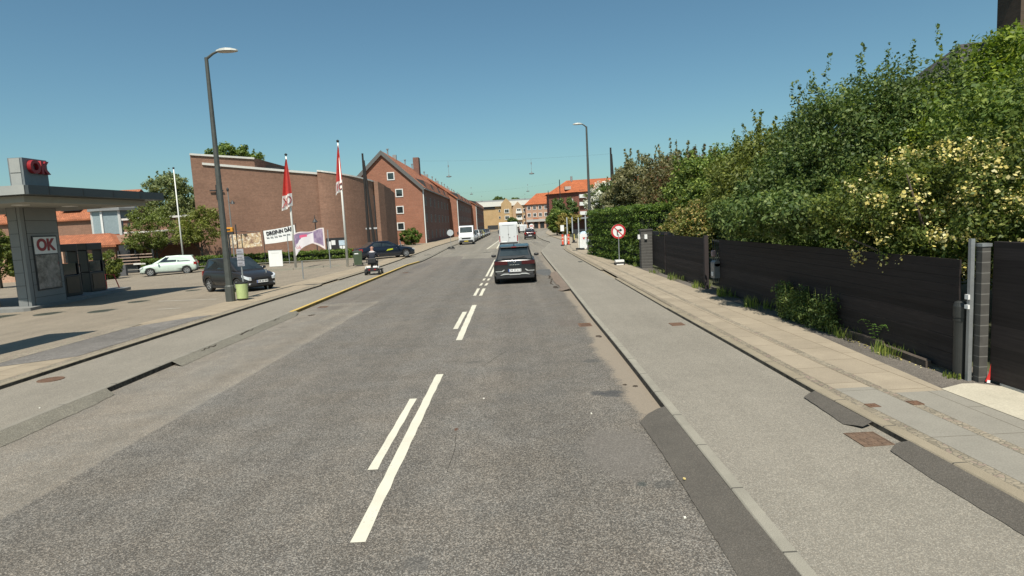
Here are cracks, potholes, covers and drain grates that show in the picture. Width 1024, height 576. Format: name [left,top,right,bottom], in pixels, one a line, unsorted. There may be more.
manhole cover [843,431,895,447]
